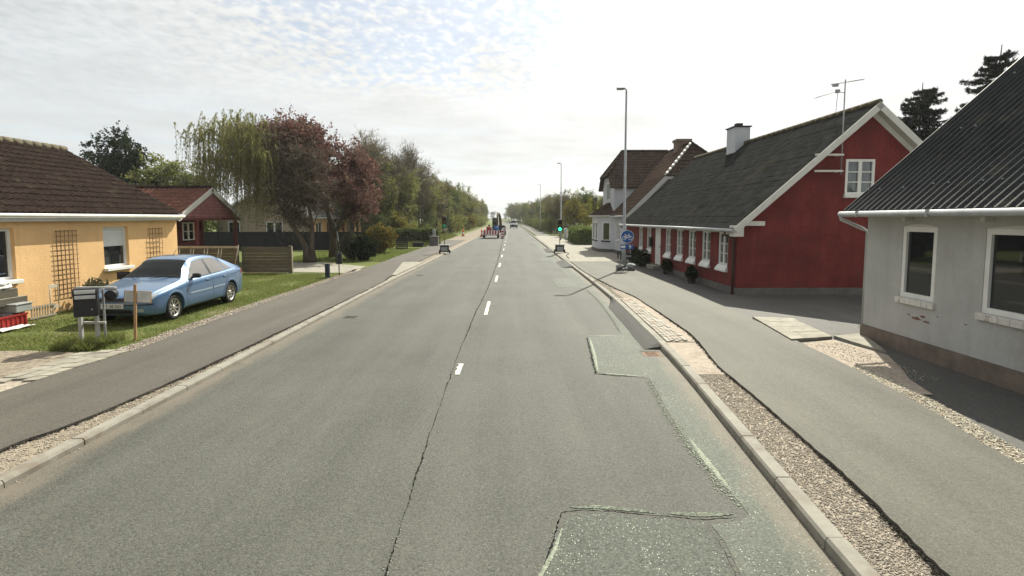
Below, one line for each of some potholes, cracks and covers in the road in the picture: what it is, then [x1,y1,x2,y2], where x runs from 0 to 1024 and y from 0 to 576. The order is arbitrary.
crack [381,240,503,576]
